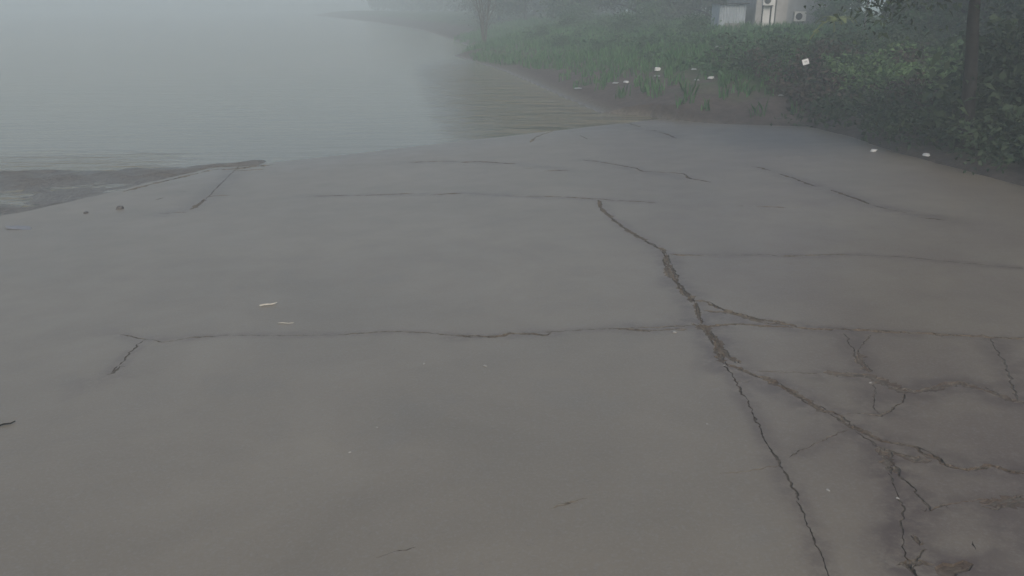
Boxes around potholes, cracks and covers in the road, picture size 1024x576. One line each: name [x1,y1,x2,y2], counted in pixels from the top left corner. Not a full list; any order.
crack [751,155,941,220]
crack [123,165,269,217]
crack [427,160,708,182]
crack [108,193,1024,576]
